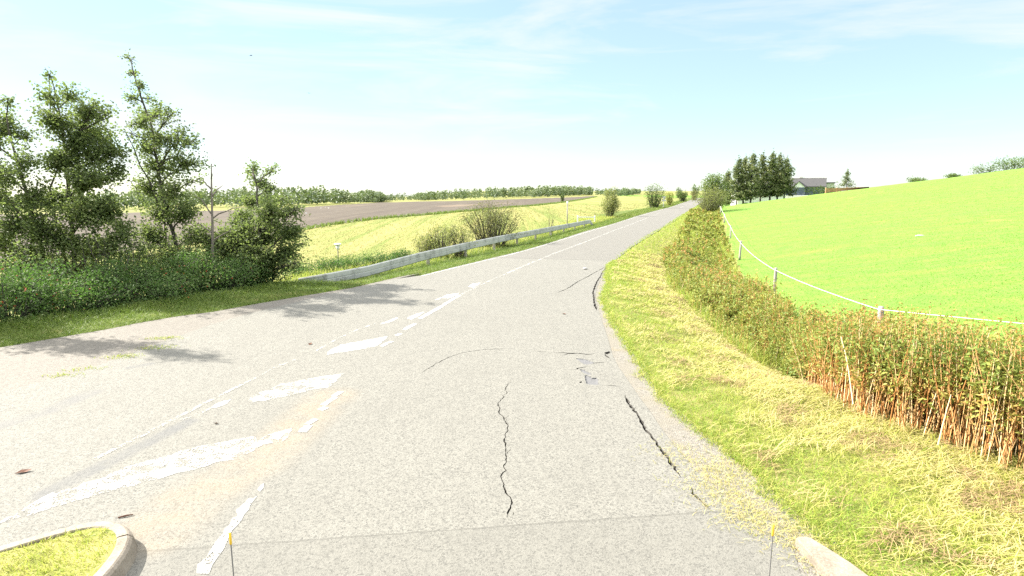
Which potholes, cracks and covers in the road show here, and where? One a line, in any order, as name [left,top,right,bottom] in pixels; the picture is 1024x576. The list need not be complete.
crack [557,268,604,310]
crack [497,384,514,518]
crack [608,385,681,477]
